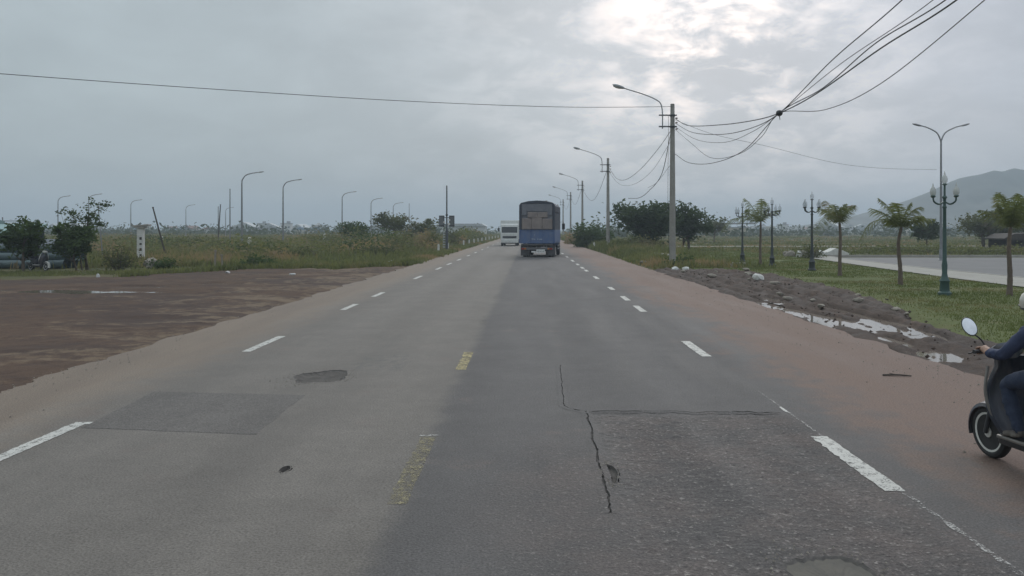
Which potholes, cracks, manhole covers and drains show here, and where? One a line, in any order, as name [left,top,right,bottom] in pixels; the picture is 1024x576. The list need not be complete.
crack [556,365,781,515]
pothole [774,551,882,576]
pothole [289,369,351,384]
pothole [601,463,619,485]
